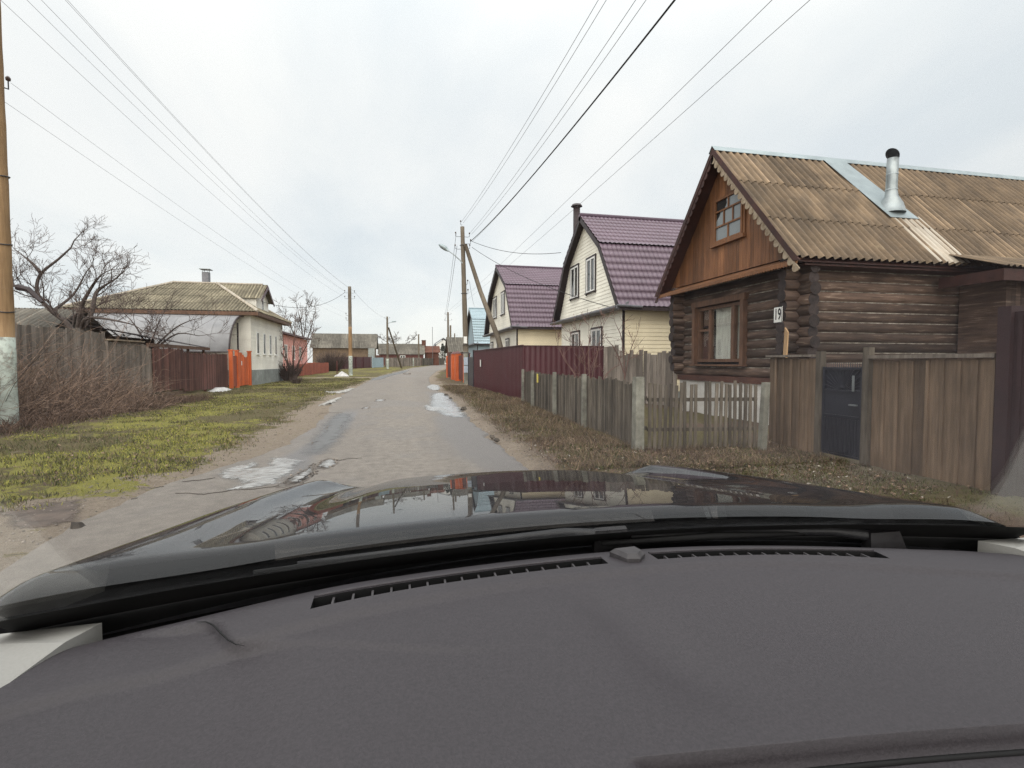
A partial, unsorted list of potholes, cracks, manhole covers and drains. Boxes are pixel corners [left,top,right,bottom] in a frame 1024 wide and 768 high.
pothole [315,458,338,470]
crack [145,477,279,495]
pothole [276,463,318,488]
